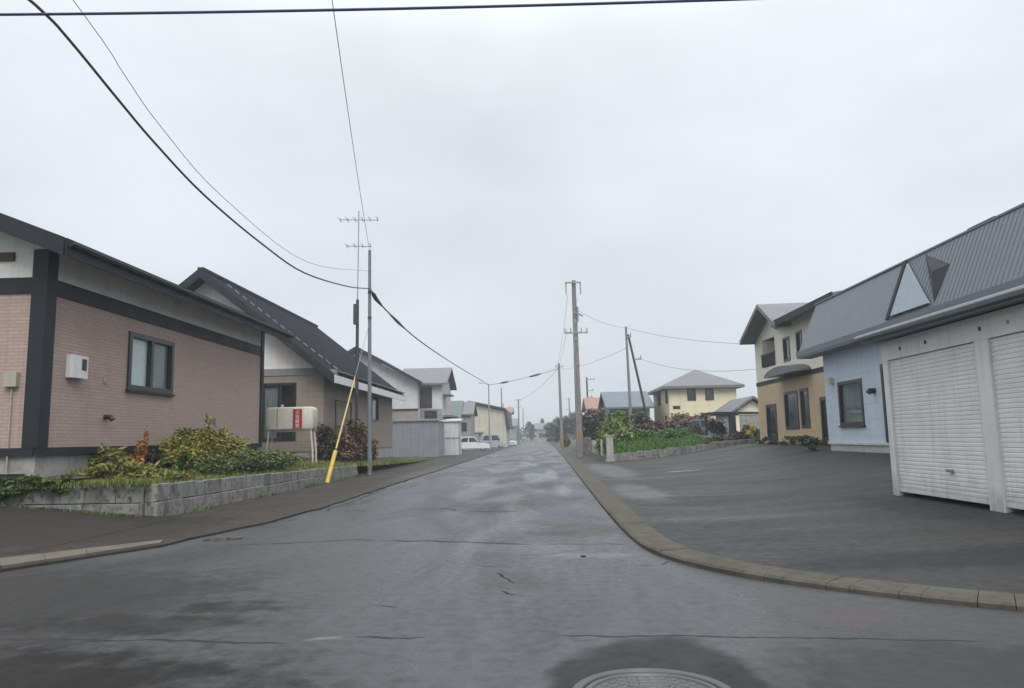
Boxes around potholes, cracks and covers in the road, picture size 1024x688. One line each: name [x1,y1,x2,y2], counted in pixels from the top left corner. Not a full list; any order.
crack [485,566,521,596]
manhole cover [573,668,731,688]
